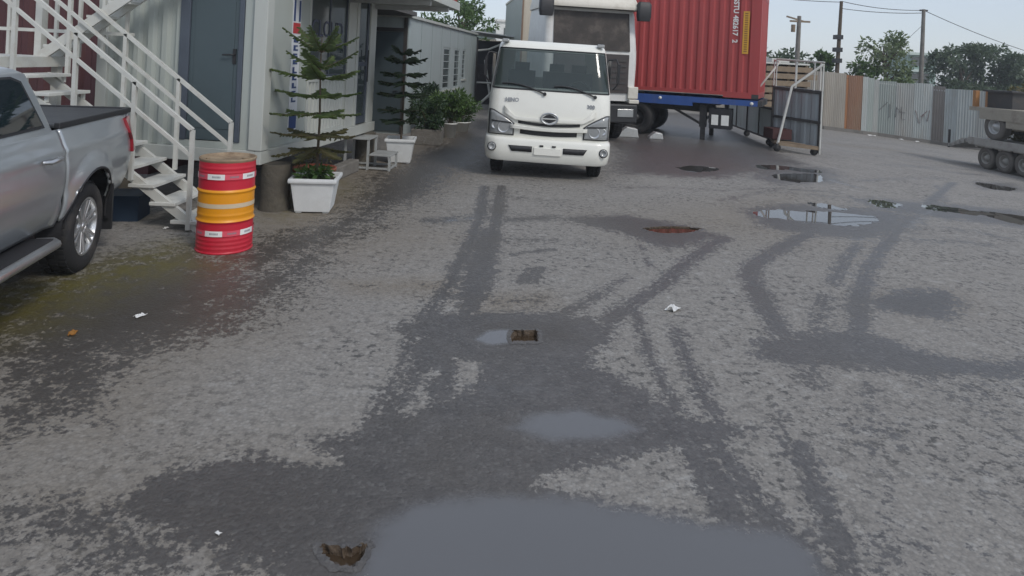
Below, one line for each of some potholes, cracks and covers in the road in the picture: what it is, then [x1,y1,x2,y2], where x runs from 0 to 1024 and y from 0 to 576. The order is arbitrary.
pothole [312,538,376,573]
pothole [506,328,544,345]
